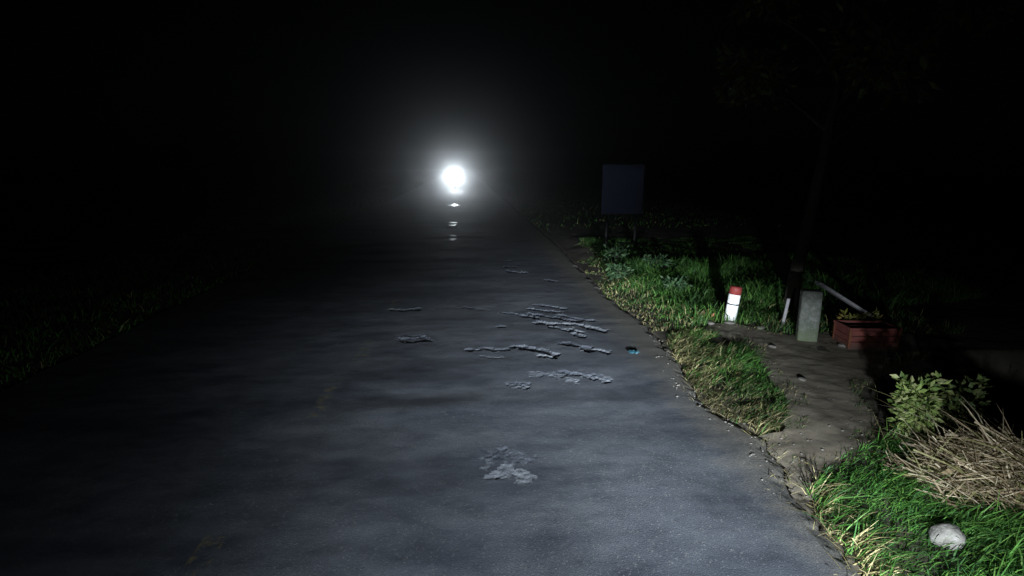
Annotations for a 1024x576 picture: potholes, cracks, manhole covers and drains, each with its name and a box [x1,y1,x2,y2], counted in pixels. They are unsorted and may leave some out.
pothole [477,446,539,485]
pothole [394,333,434,344]
pothole [557,341,617,355]
pothole [528,369,614,385]
pothole [504,381,532,390]
